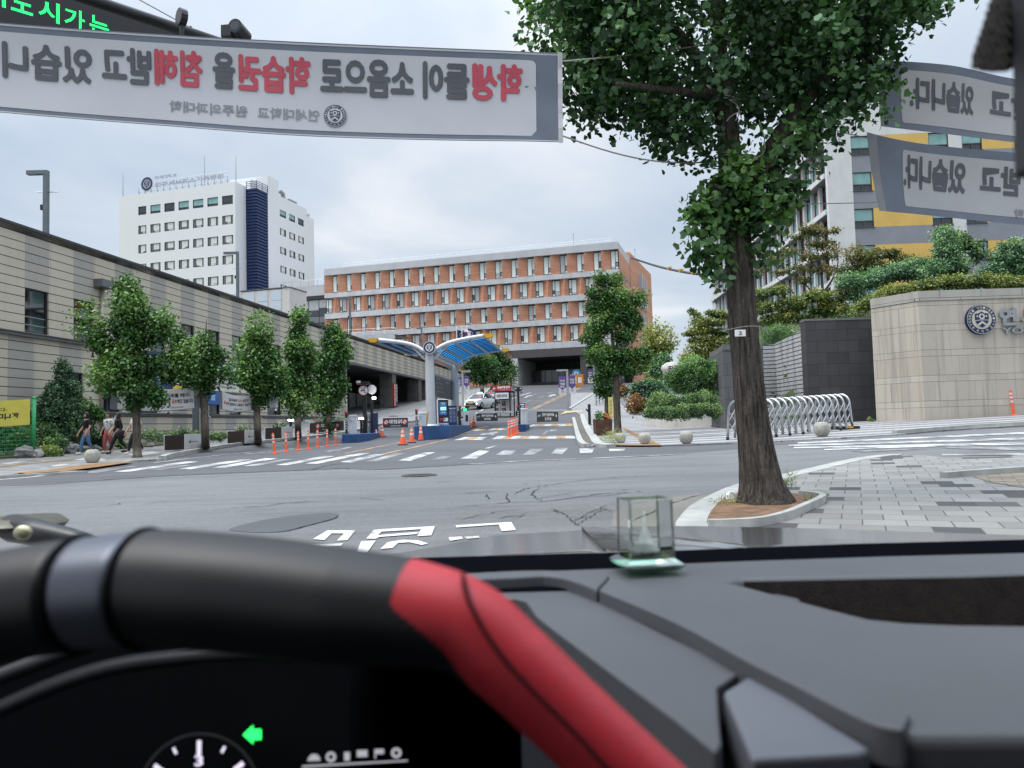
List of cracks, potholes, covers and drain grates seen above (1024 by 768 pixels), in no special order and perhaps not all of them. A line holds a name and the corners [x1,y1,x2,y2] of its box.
crack [367,475,649,526]
